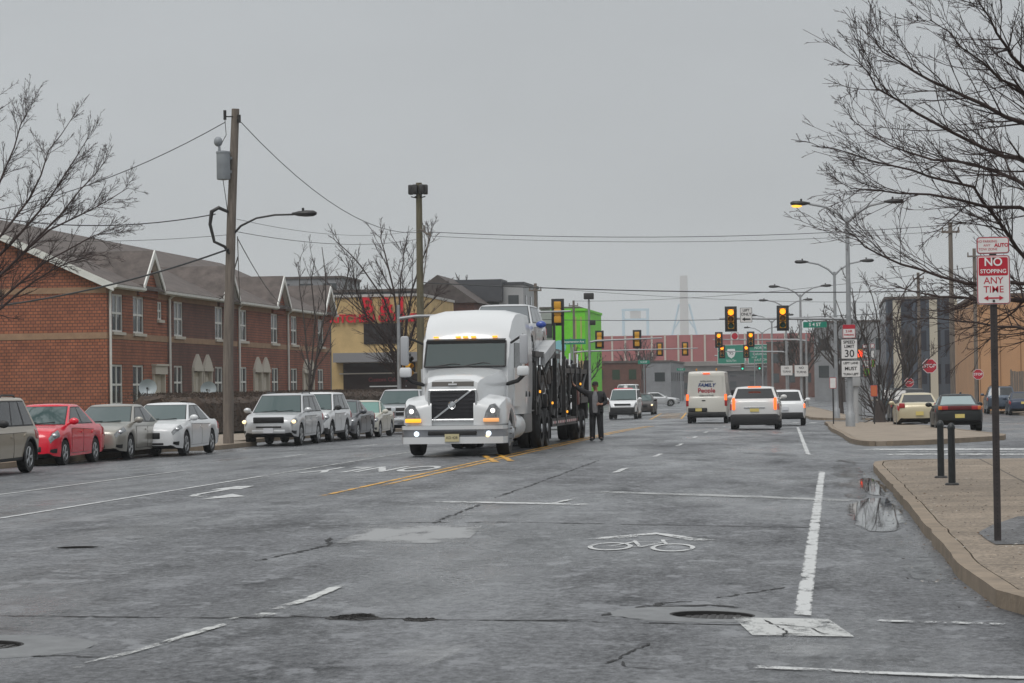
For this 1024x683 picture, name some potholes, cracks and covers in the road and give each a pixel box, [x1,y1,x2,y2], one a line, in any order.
crack [601,587,785,625]
pothole [326,613,381,621]
crack [607,643,660,669]
